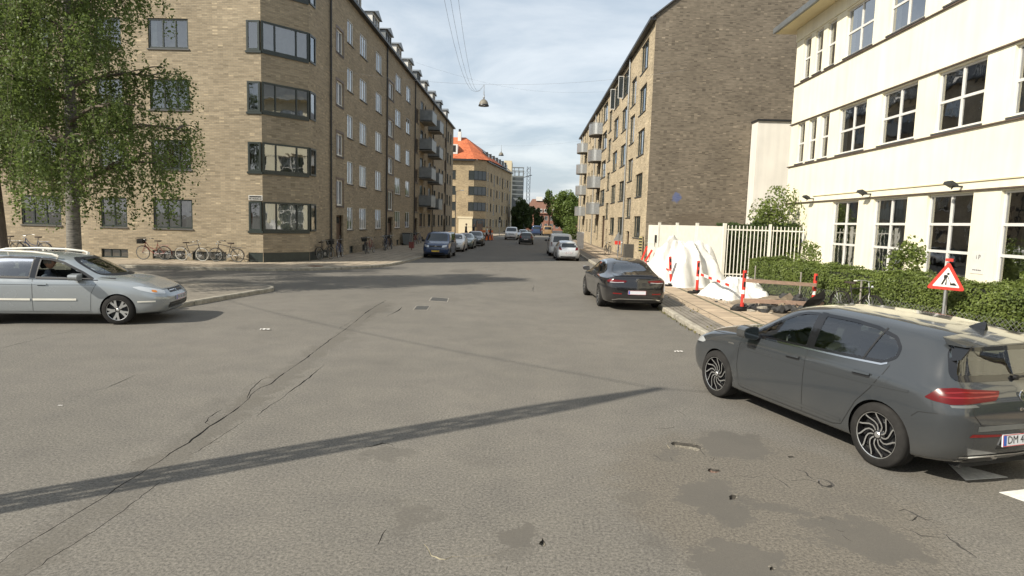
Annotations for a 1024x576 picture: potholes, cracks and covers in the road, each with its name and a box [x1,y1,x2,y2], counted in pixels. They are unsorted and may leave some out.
pothole [669,441,704,451]
crack [0,300,386,575]
crack [731,468,834,488]
crack [899,509,977,558]
